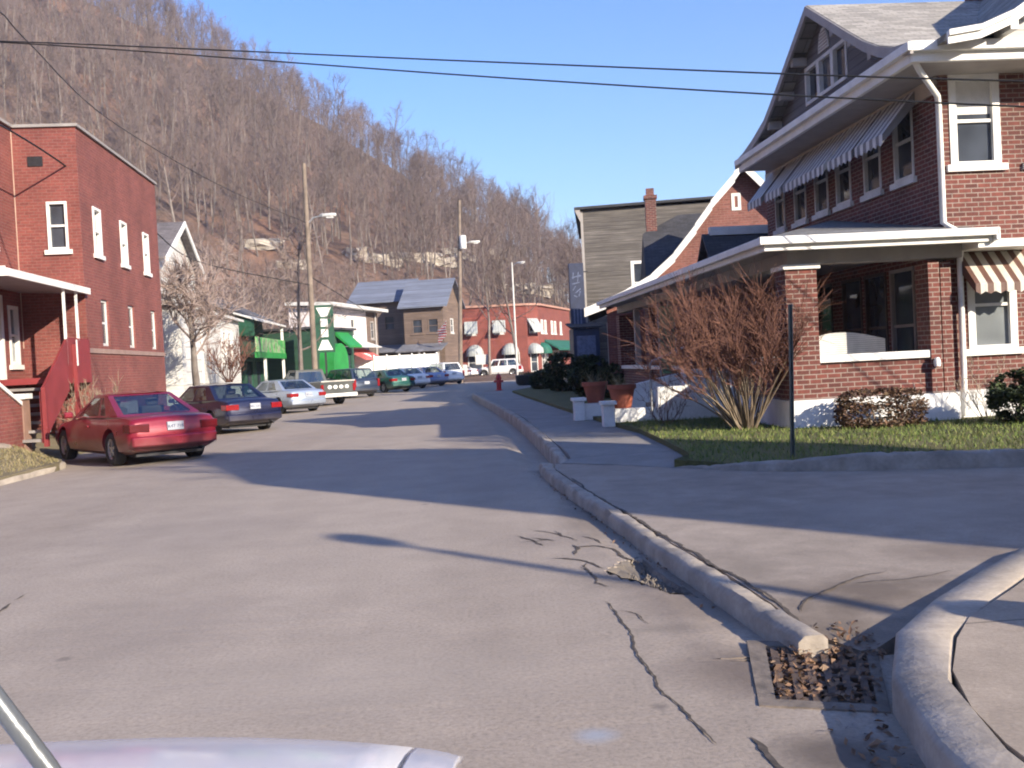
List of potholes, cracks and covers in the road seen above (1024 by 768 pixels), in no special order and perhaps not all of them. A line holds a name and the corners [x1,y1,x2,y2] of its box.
pothole [607,557,698,598]
crack [750,737,784,768]
drain grate [747,640,891,714]
crack [515,478,950,744]
